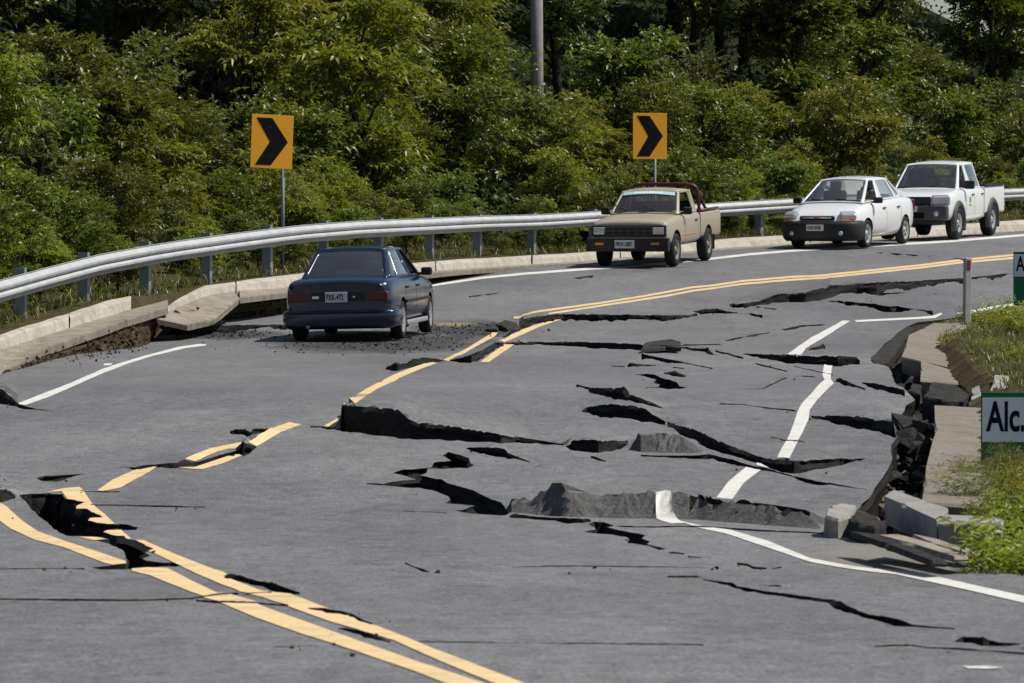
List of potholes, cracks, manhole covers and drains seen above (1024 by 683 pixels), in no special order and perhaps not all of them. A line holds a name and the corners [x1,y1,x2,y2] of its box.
crack [310,252,1024,655]
crack [0,489,205,570]
crack [122,428,268,470]
